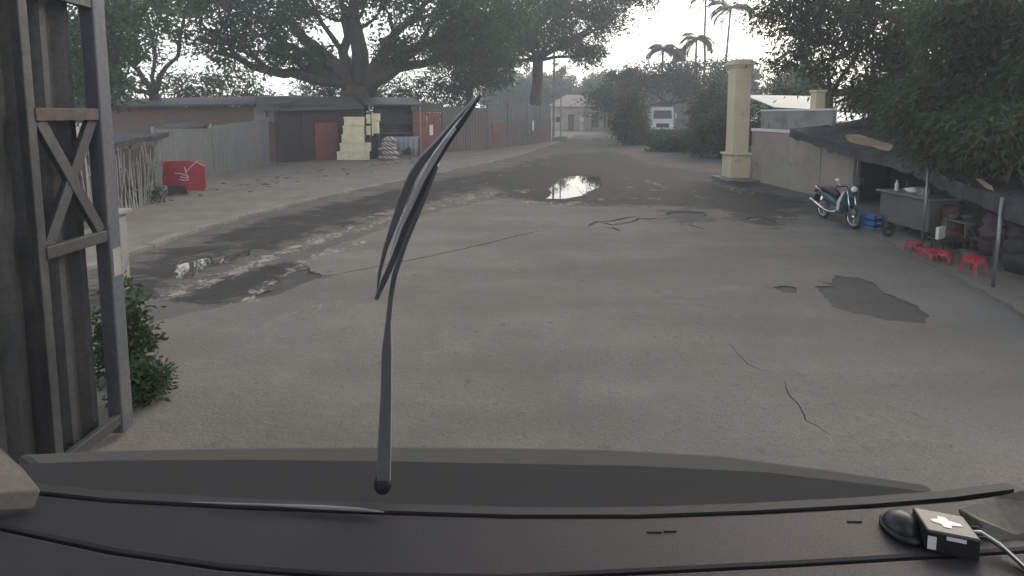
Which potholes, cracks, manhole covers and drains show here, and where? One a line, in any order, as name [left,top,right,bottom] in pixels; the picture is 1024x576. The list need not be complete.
pothole [544,175,603,199]
crack [327,229,551,277]
pothole [666,211,707,224]
pothole [214,250,251,263]
crack [588,216,704,231]
pothole [774,285,797,293]
pothole [172,256,214,280]
crack [784,381,833,437]
